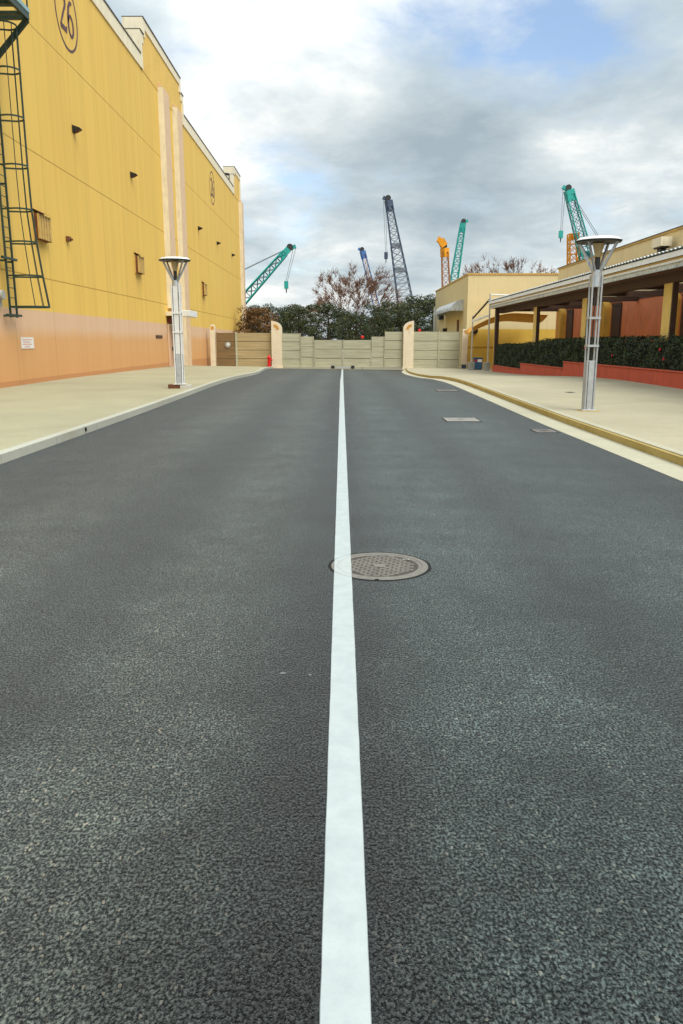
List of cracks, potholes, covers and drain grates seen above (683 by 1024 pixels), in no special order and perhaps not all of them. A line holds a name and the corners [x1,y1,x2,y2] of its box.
manhole cover [328,552,432,581]
